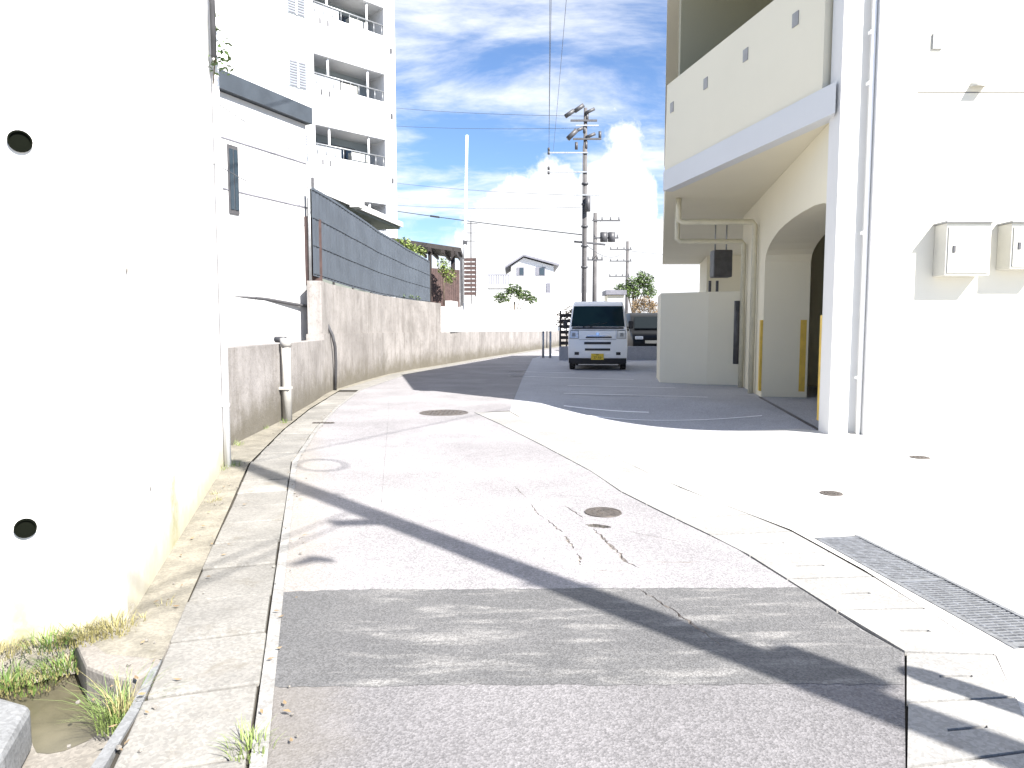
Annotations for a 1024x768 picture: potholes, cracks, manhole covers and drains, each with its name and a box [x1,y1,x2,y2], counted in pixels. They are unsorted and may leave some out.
drain grate [813,535,1024,688]
manhole cover [585,507,622,517]
crack [515,487,684,571]
crack [641,590,720,645]
